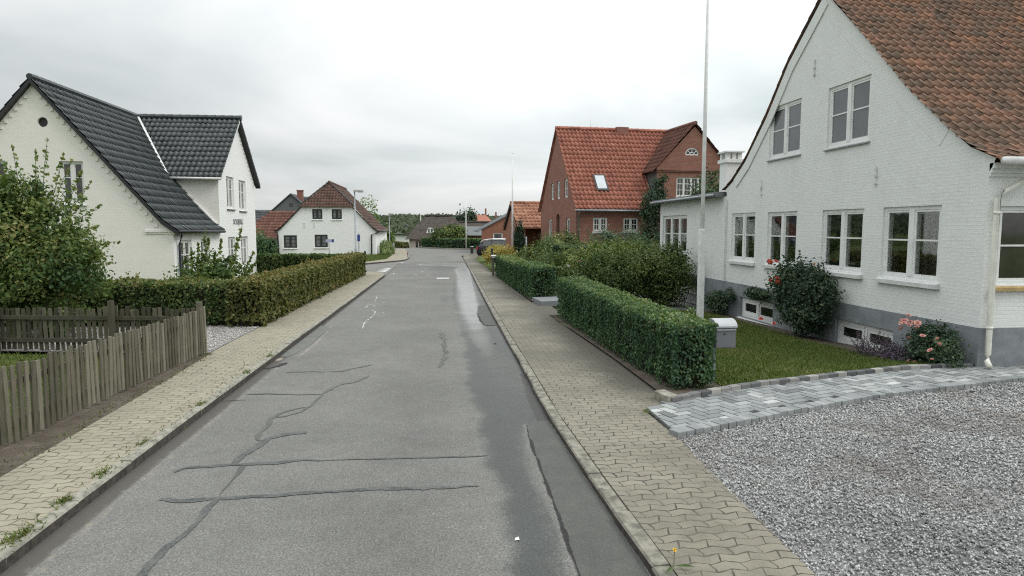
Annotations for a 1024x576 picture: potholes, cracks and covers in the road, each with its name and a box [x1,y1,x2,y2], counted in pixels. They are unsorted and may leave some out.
crack [438,332,449,368]
